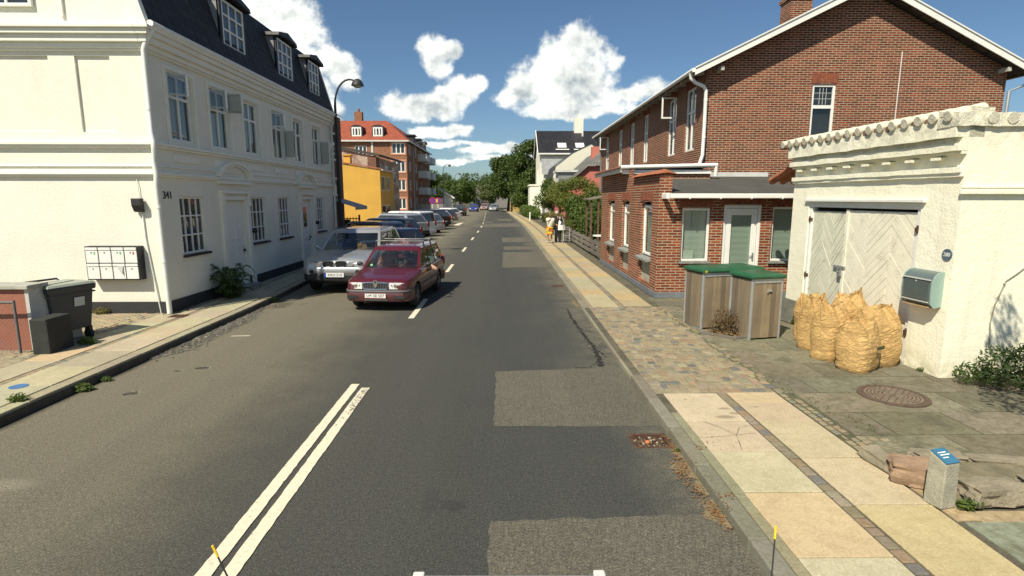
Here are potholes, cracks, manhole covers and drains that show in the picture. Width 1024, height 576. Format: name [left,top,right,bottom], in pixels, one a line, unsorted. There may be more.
manhole cover [856,385,932,408]
drain grate [627,433,673,448]
crack [566,309,606,368]
